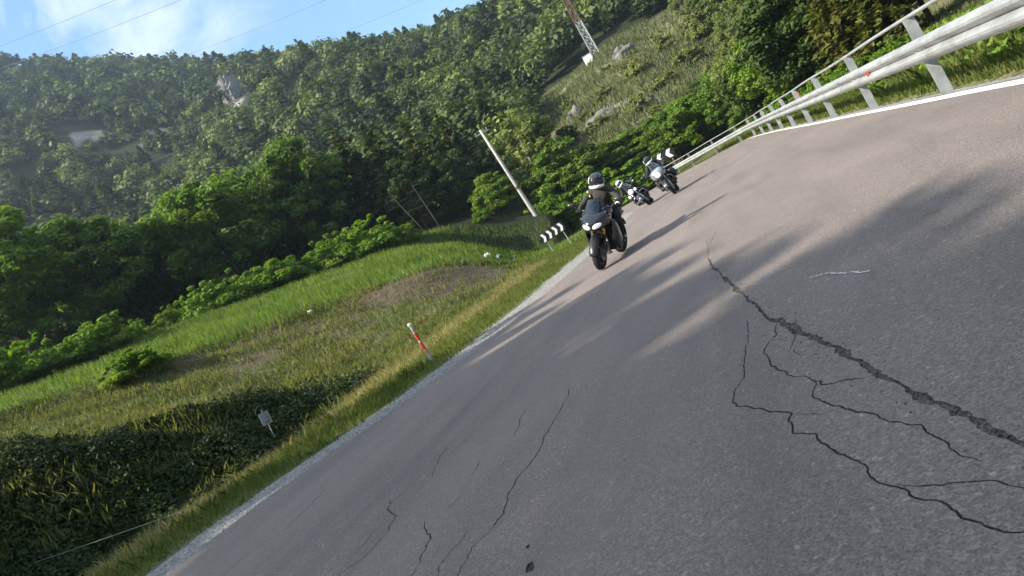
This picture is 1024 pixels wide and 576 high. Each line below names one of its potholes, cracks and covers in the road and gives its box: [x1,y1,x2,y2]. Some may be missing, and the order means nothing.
crack [331,489,408,576]
crack [412,388,570,576]
